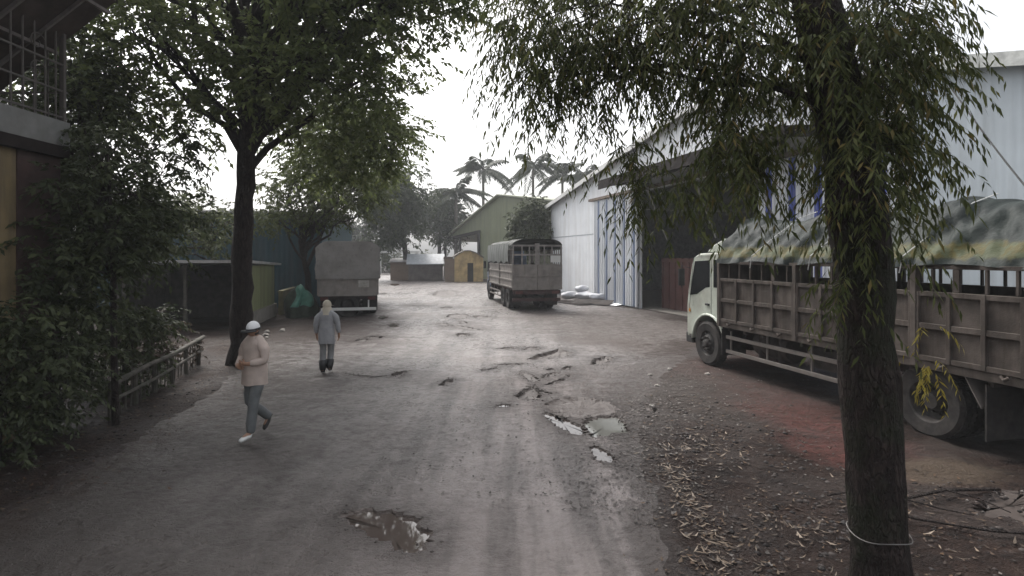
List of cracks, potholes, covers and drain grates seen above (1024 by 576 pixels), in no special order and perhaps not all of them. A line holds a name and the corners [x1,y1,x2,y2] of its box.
pothole [589,445,617,462]
pothole [515,384,542,399]
pothole [338,507,434,553]
pothole [591,356,615,365]
pothole [540,412,589,435]
pothole [581,415,630,437]
pothole [528,349,573,360]
